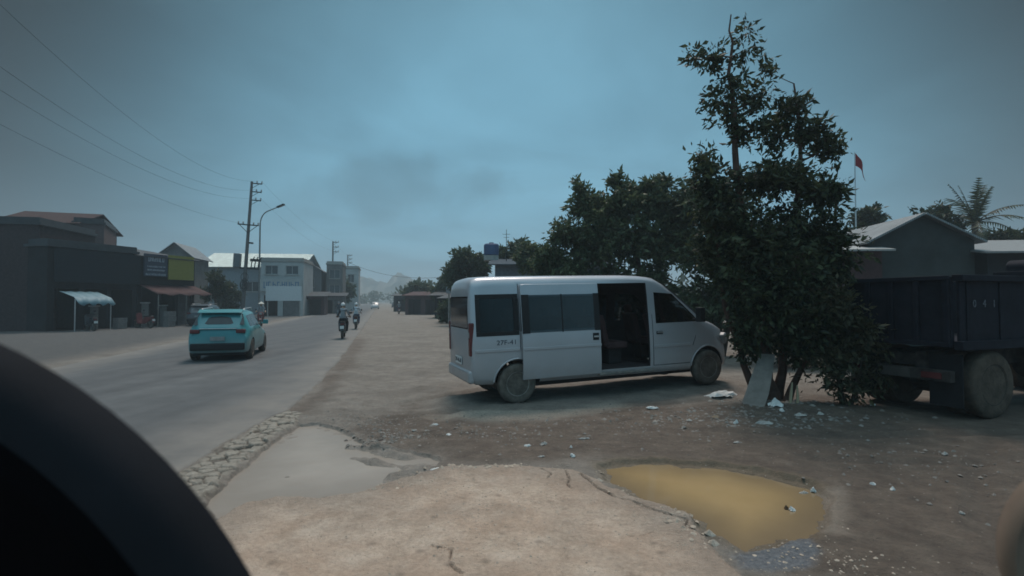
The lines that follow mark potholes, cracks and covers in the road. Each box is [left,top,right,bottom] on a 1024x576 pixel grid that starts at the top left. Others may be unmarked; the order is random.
crack [536,467,696,538]
pothole [593,457,839,553]
crack [429,544,465,575]
pothole [201,422,446,519]
